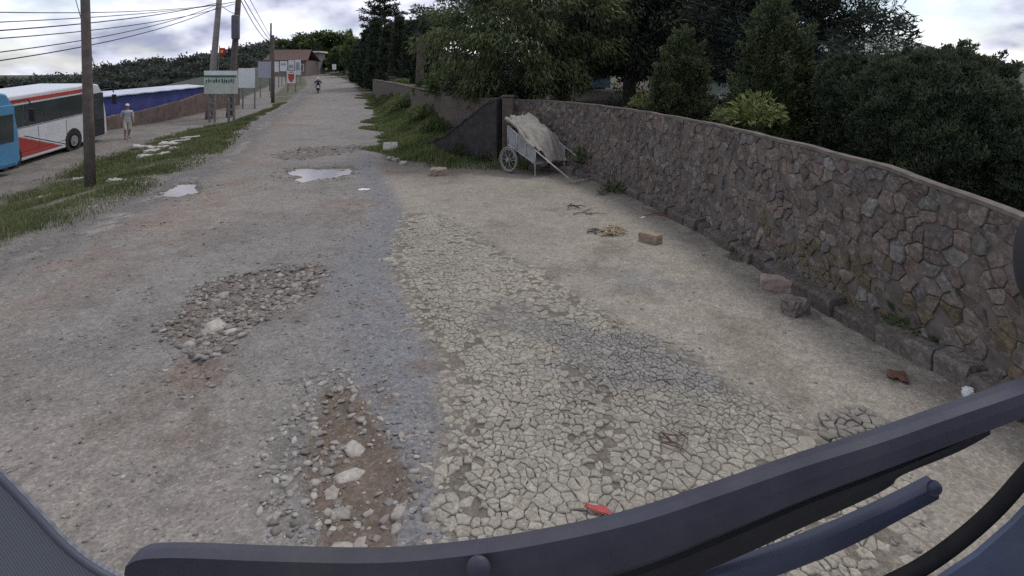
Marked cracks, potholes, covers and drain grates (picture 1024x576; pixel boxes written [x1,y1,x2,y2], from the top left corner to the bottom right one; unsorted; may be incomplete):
pothole [266,164,370,184]
pothole [151,262,336,360]
pothole [253,366,467,547]
pothole [142,179,224,202]
